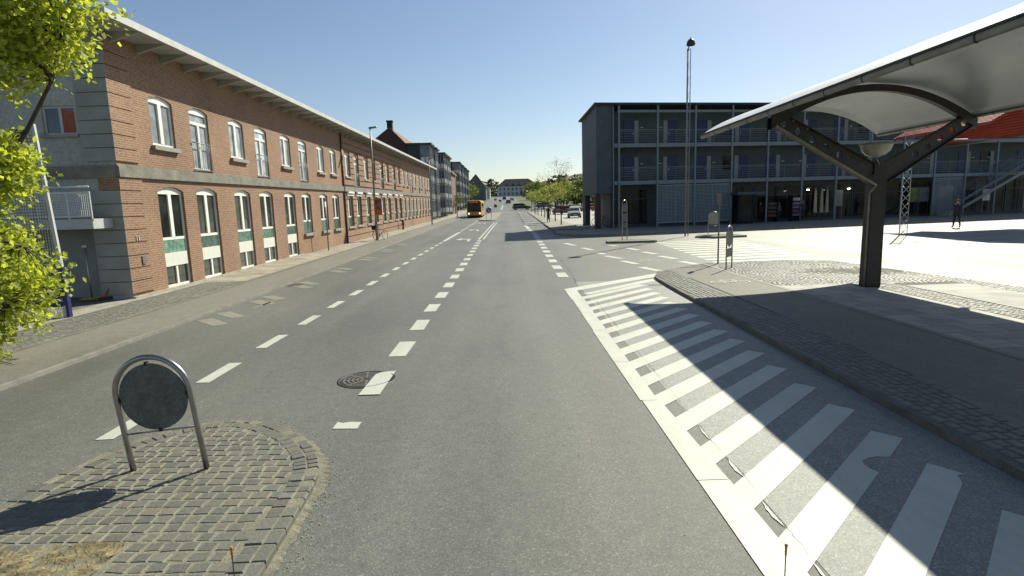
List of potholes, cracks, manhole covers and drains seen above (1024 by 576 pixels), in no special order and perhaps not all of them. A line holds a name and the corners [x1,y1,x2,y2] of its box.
manhole cover [337,371,396,389]
